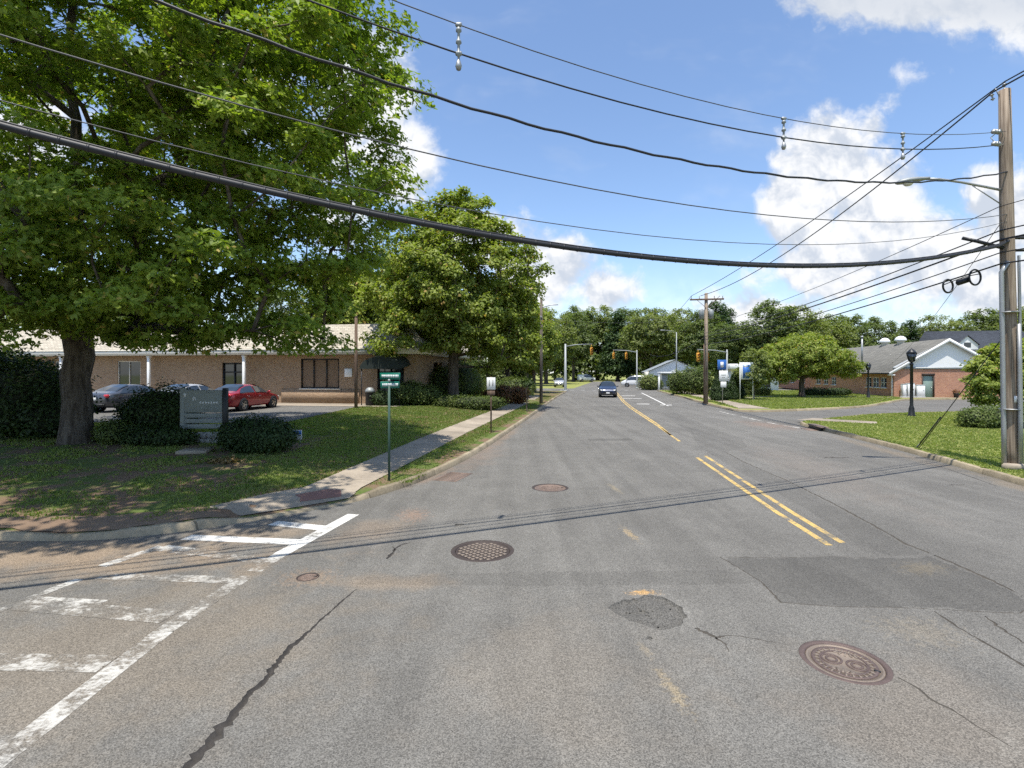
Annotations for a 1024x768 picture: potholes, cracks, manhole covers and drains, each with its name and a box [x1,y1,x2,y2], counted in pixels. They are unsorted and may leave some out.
manhole cover [532,484,568,492]
manhole cover [451,540,514,562]
pothole [608,595,687,630]
manhole cover [799,640,894,685]
crack [985,616,1024,643]
manhole cover [296,573,320,581]
crack [694,628,787,651]
crack [899,678,1012,747]
